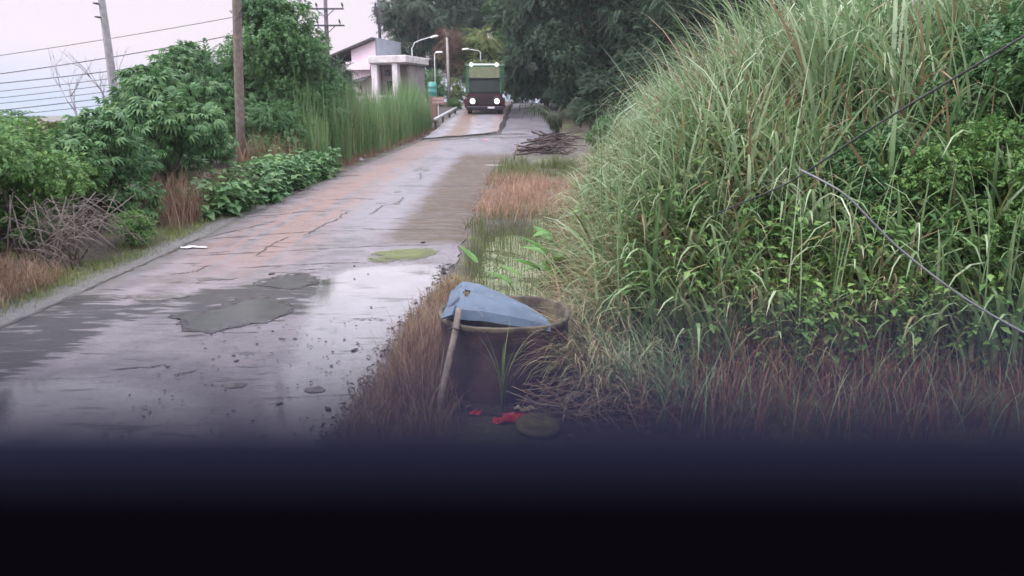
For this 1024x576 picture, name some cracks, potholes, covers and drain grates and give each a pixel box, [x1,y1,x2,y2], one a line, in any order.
crack [0,210,350,328]
